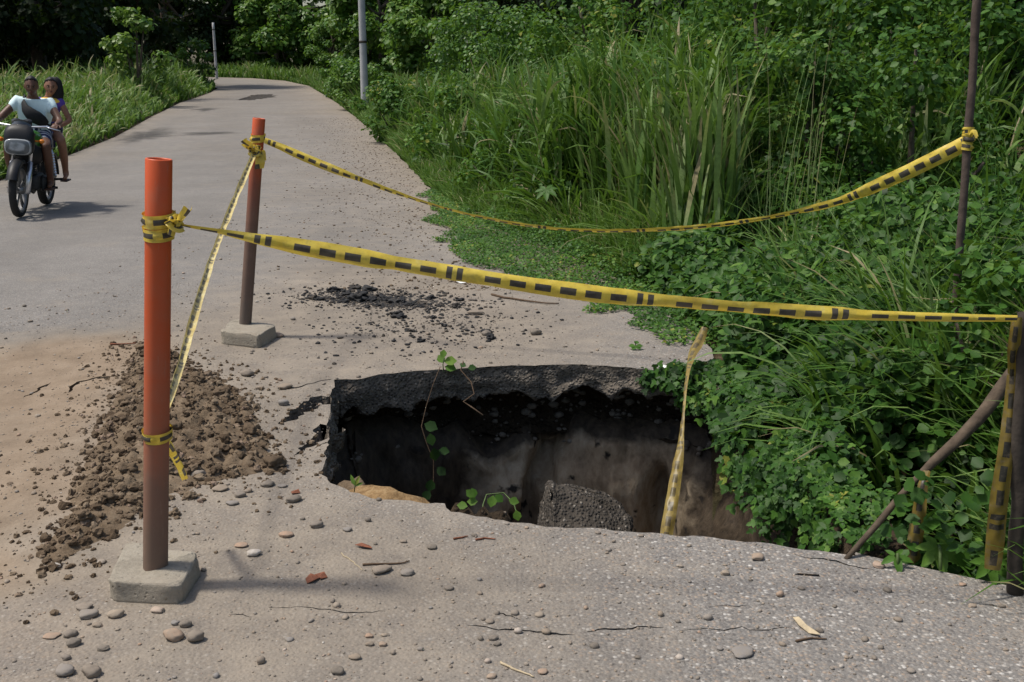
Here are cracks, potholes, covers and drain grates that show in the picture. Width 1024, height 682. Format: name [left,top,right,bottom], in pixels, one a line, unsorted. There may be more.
crack [69,376,111,392]
crack [468,613,664,635]
pothole [279,364,906,635]
